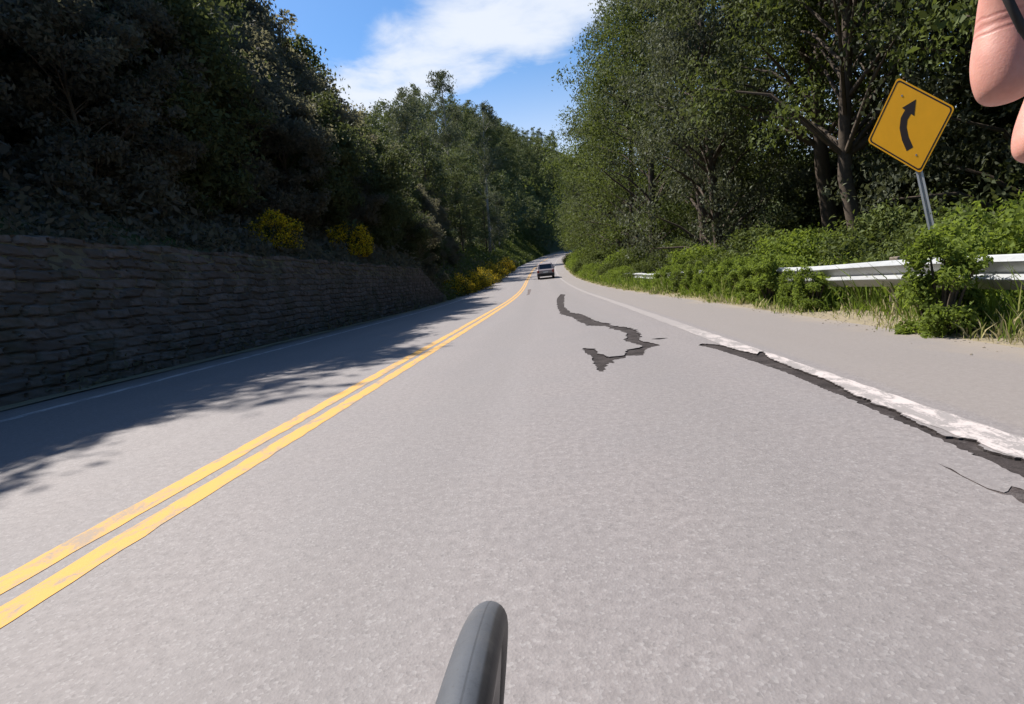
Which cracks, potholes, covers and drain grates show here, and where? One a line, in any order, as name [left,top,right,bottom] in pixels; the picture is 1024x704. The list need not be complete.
crack [700,343,1024,503]
crack [557,294,665,372]
